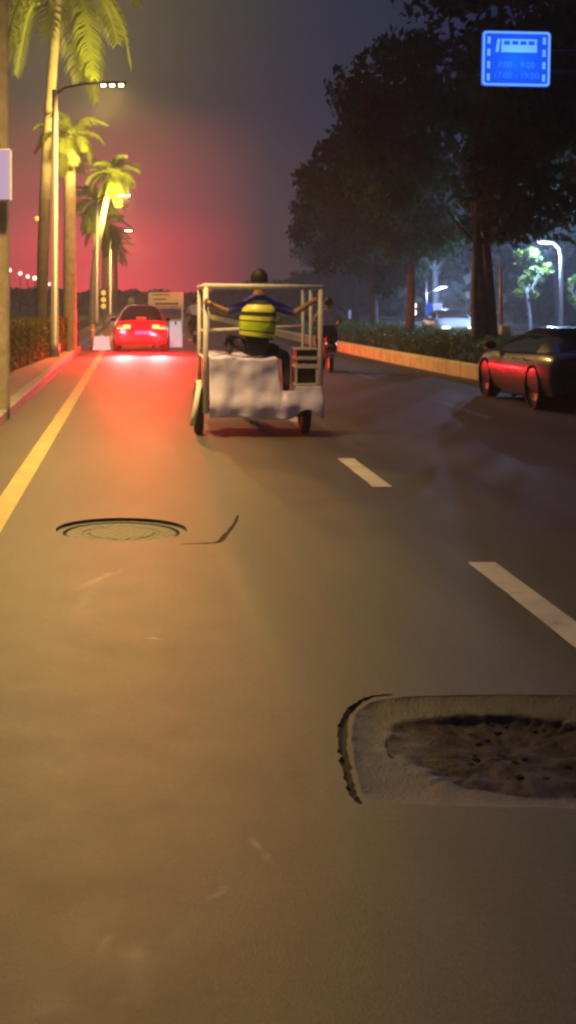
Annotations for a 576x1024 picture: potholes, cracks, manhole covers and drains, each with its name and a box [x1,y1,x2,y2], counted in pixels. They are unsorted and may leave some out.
manhole cover [56,518,187,541]
pothole [351,695,576,808]
crack [191,516,239,544]
